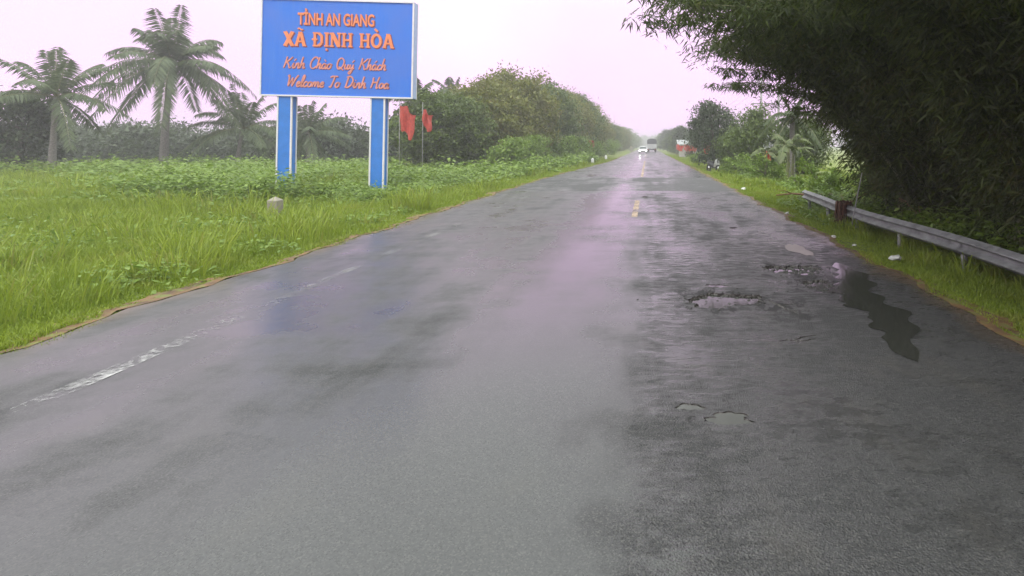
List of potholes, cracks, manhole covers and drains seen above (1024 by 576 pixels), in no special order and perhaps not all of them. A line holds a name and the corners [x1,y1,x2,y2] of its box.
pothole [637,288,778,311]
pothole [704,411,754,425]
pothole [747,263,852,276]
